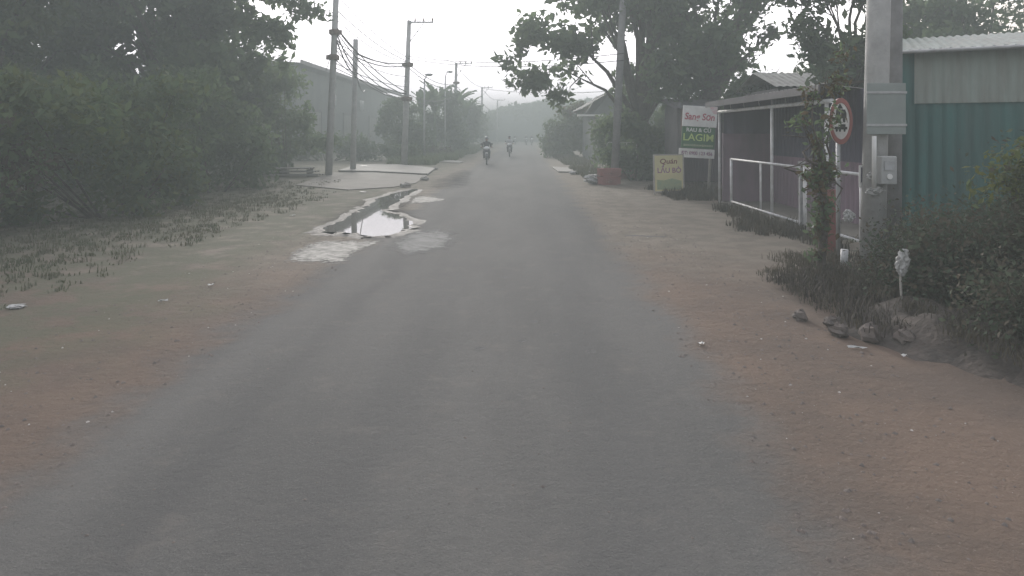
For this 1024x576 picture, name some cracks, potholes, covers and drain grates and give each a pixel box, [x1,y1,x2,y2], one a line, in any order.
pothole [304,189,427,239]
